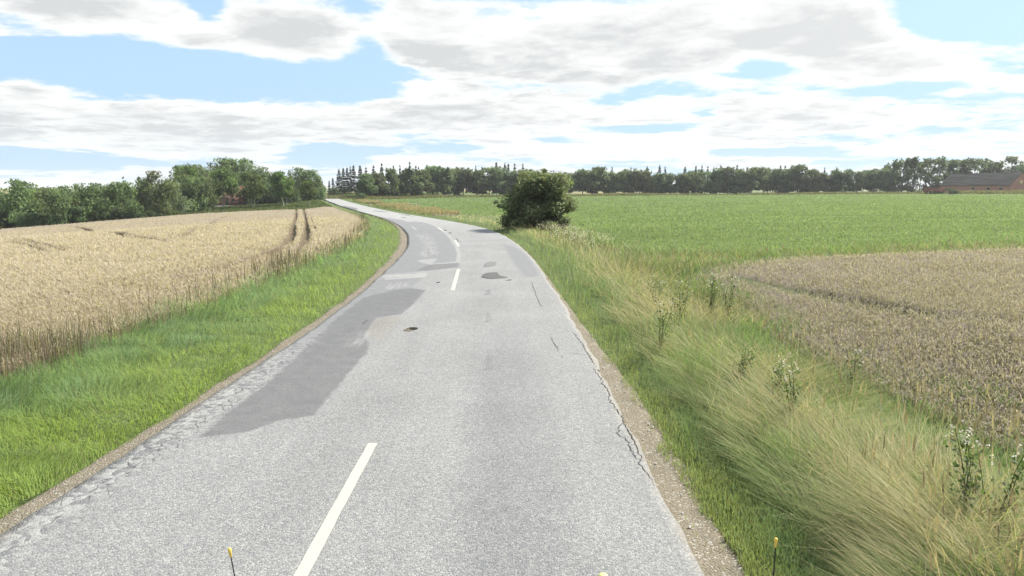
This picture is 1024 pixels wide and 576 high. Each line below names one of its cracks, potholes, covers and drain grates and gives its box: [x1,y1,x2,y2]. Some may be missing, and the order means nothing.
crack [570,332,653,482]
